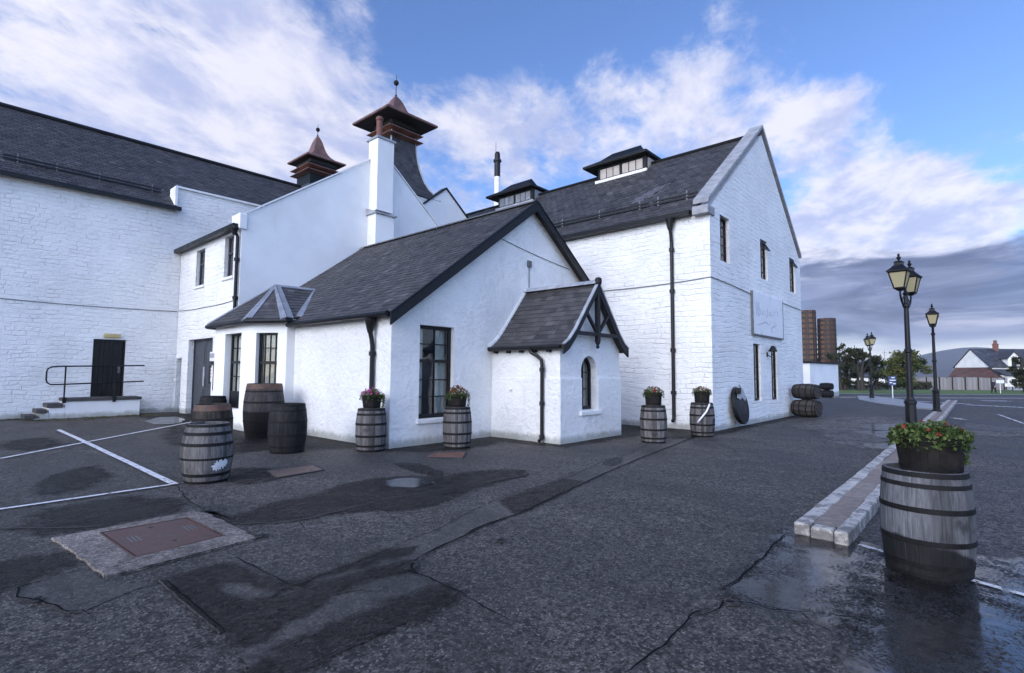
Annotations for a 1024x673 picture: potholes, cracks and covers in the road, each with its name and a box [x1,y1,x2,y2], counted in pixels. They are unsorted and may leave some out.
crack [628,533,810,671]
manhole cover [51,510,255,579]
manhole cover [265,465,325,479]
